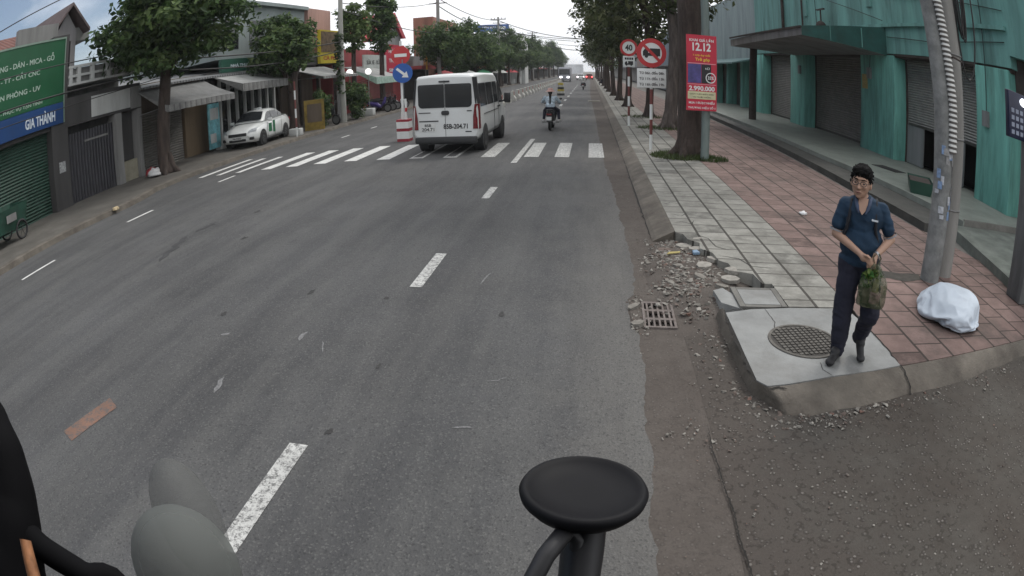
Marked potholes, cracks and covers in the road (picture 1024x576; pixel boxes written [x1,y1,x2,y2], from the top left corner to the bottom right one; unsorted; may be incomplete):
drain grate [641,301,678,330]
manhole cover [768,324,831,359]
utility cover [729,287,788,310]
crack [708,429,753,576]
